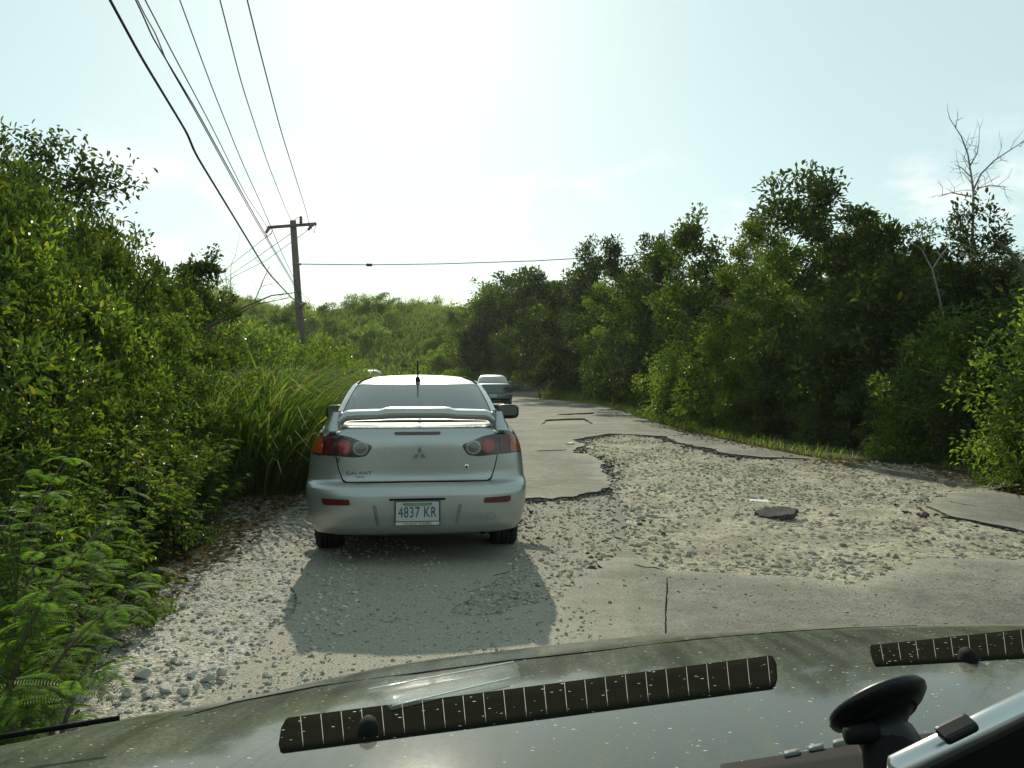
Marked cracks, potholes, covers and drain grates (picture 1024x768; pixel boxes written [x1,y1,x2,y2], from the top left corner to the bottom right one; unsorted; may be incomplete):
crack [634,564,668,634]
pothole [573,433,1024,586]
